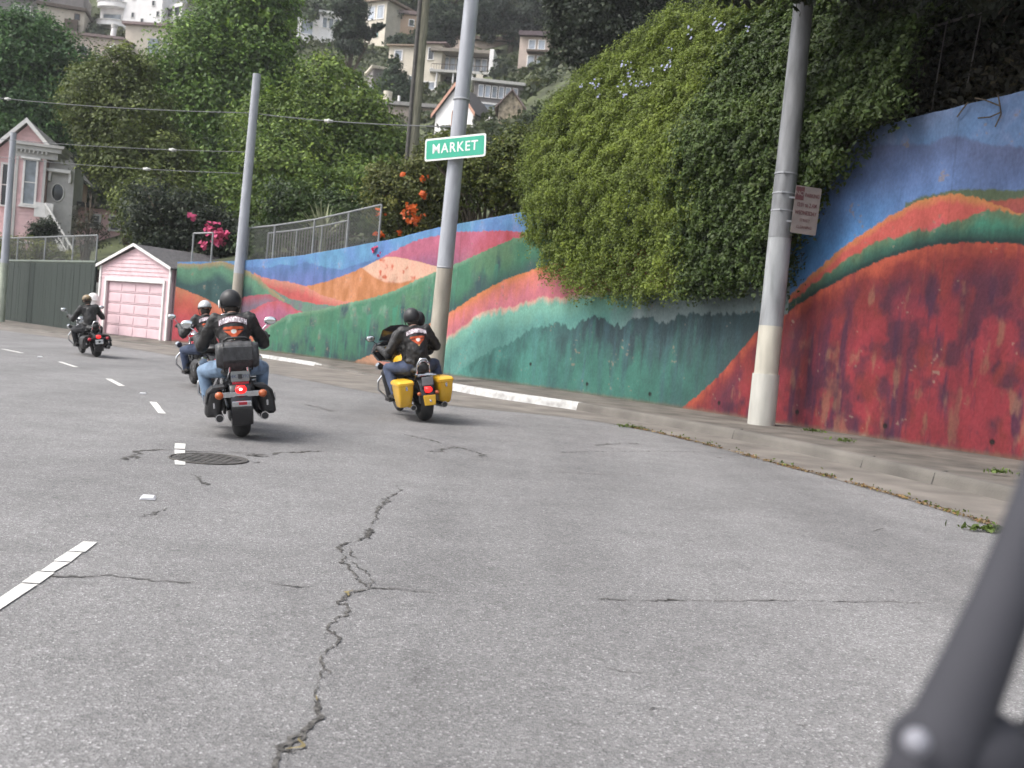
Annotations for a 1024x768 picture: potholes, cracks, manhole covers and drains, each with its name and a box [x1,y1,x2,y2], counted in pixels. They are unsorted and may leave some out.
crack [271,485,435,768]
crack [404,434,487,457]
crack [562,442,737,458]
crack [121,449,319,463]
manhole cover [168,453,249,465]
crack [23,574,183,583]
